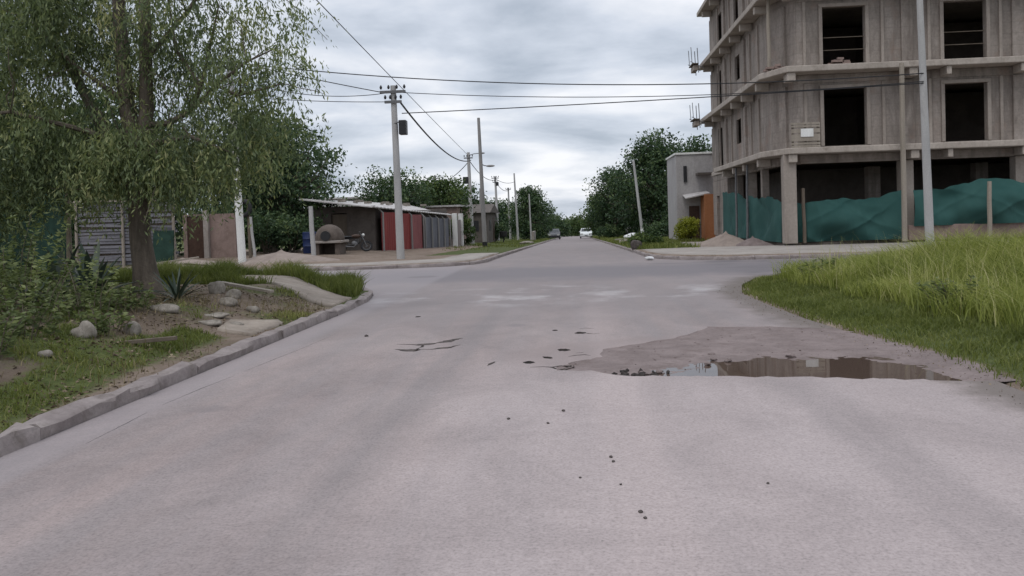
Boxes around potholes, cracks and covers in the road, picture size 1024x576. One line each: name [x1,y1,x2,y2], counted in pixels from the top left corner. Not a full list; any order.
pothole [556,326,1019,382]
